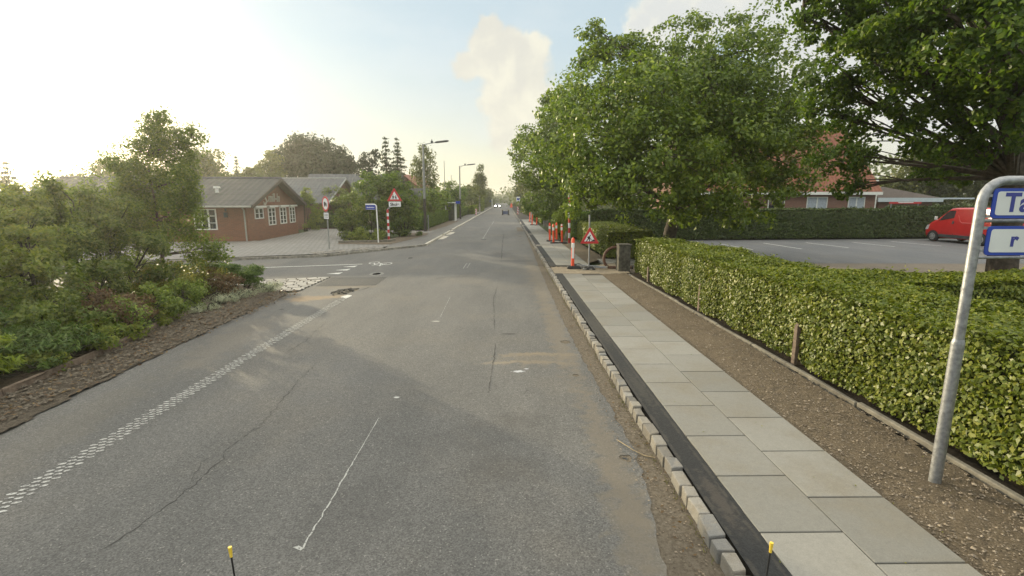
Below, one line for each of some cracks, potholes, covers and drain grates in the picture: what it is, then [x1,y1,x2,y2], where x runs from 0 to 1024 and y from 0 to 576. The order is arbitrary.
crack [92,368,313,555]
